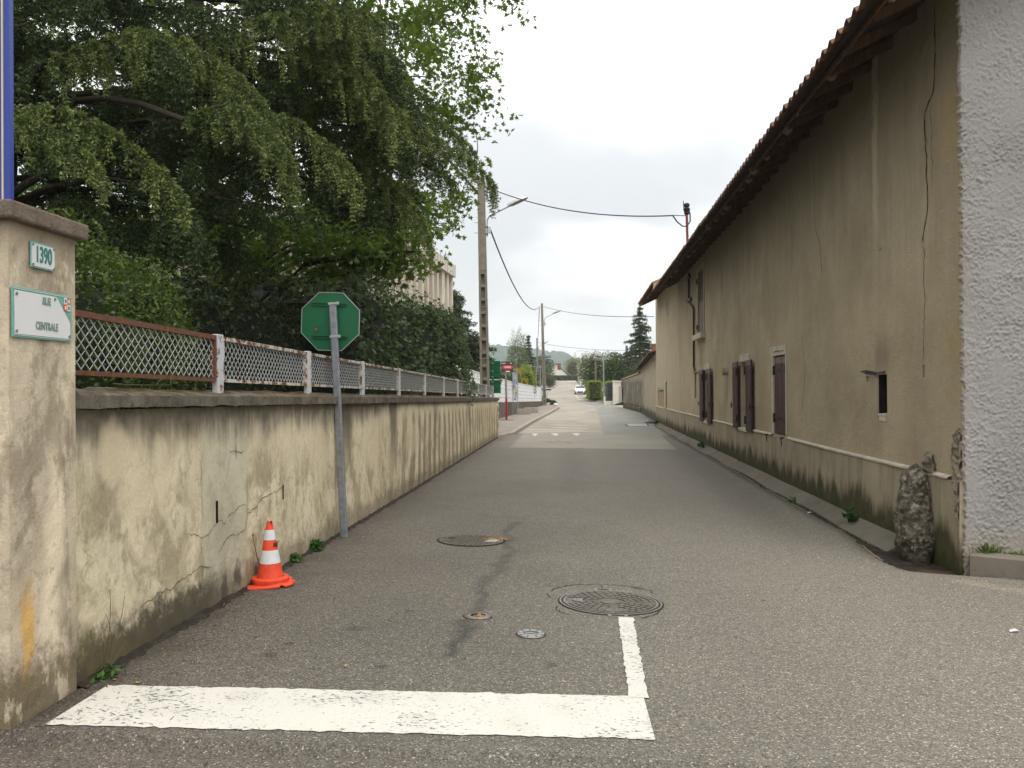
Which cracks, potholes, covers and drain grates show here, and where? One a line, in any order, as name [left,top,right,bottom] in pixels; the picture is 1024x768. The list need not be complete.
manhole cover [558,588,664,618]
manhole cover [437,535,508,546]
manhole cover [516,629,546,639]
